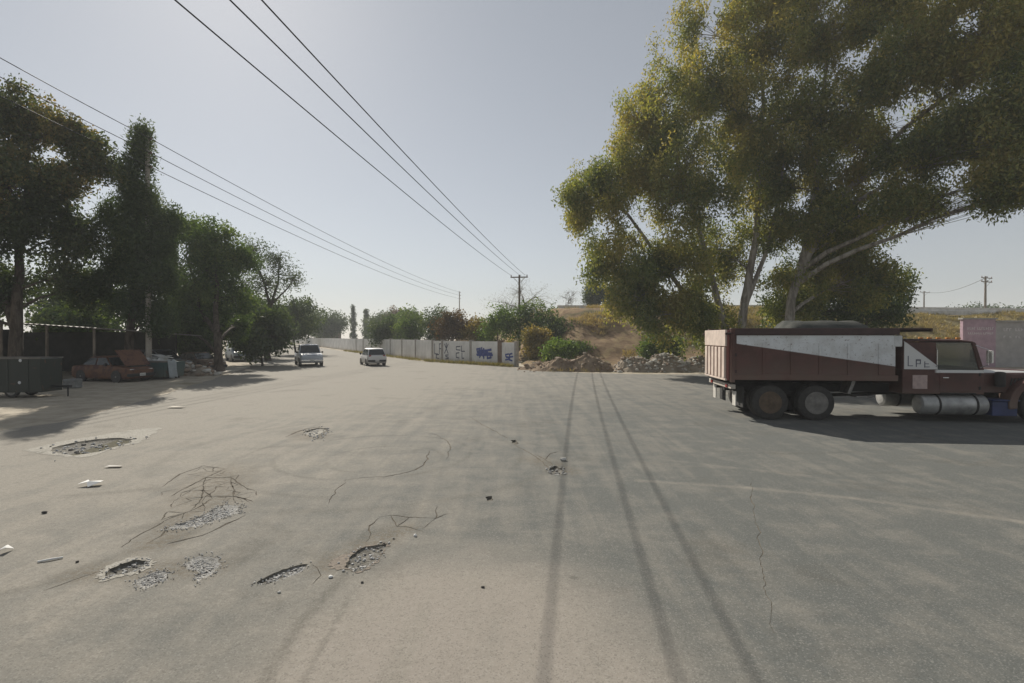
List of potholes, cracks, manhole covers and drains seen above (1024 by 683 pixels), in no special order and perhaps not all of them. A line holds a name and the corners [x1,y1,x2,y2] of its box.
pothole [328,538,395,575]
pothole [545,465,567,476]
pothole [95,556,157,582]
crack [367,508,446,541]
pothole [251,561,312,586]
pothole [177,551,228,586]
pothole [125,567,176,591]
crack [122,466,257,547]
crack [329,434,451,502]
pothole [24,428,162,461]
pothole [161,501,261,532]
pothole [302,426,332,441]
